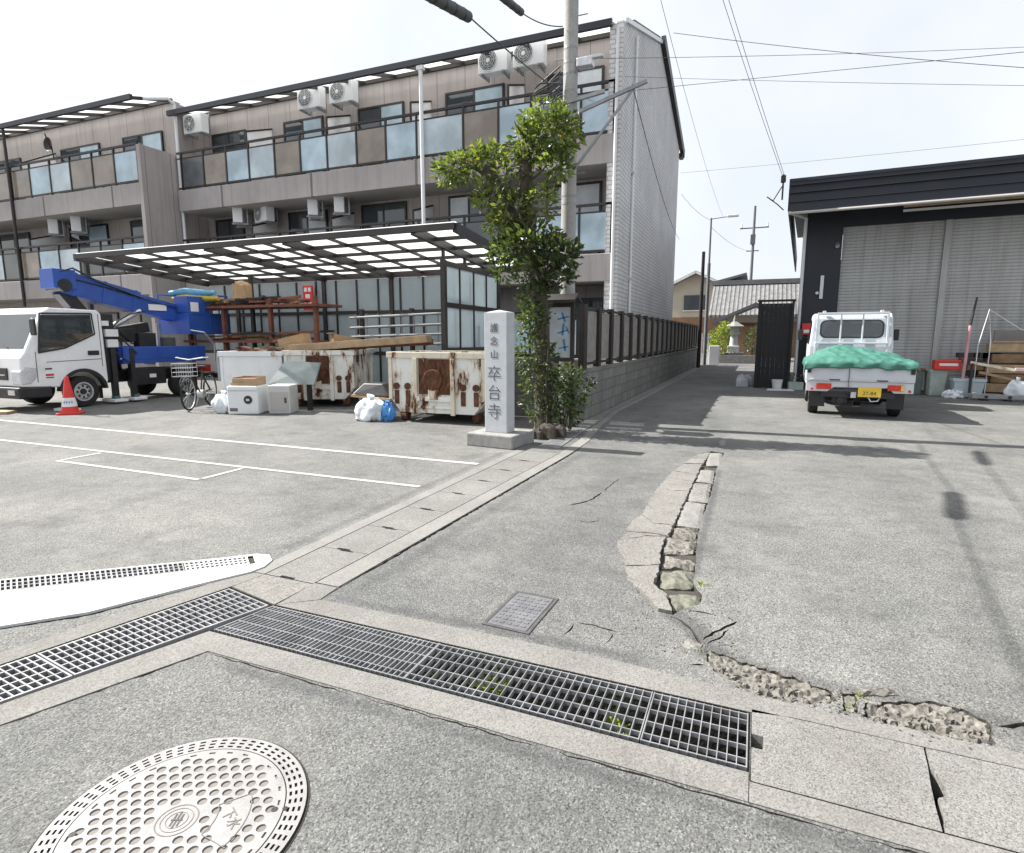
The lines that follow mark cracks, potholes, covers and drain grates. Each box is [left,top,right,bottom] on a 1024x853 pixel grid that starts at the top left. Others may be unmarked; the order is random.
crack [655,451,737,647]
drain grate [214,605,440,681]
utility cover [482,590,559,635]
drain grate [0,654,73,704]
crack [563,622,616,644]
manhole cover [27,737,310,853]
drain grate [403,643,653,743]
pothole [706,651,837,704]
crack [330,450,619,594]
pothole [842,693,858,714]
drain grate [37,588,269,679]
pothole [863,701,996,746]
